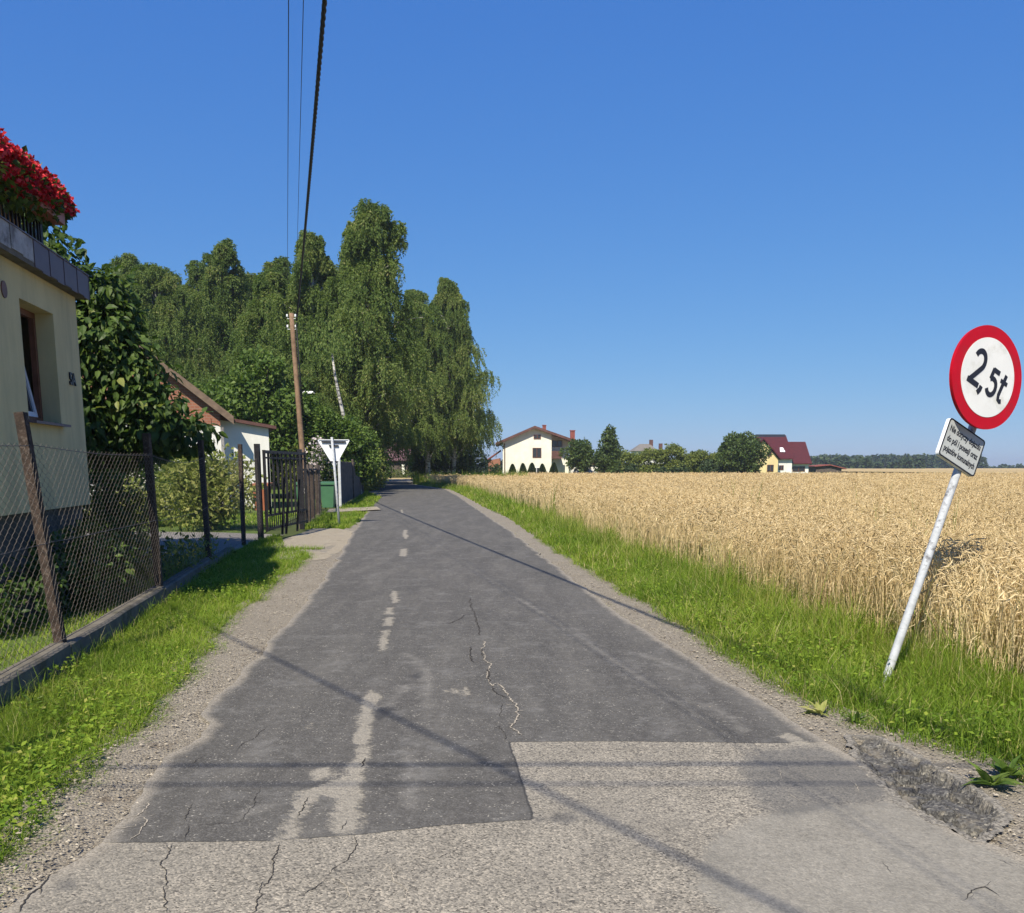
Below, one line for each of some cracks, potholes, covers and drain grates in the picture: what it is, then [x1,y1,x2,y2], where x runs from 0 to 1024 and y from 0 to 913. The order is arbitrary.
crack [115,803,152,841]
crack [160,789,279,913]
crack [305,823,358,900]
crack [18,843,84,913]
crack [451,598,522,740]
pothole [843,734,1016,843]
